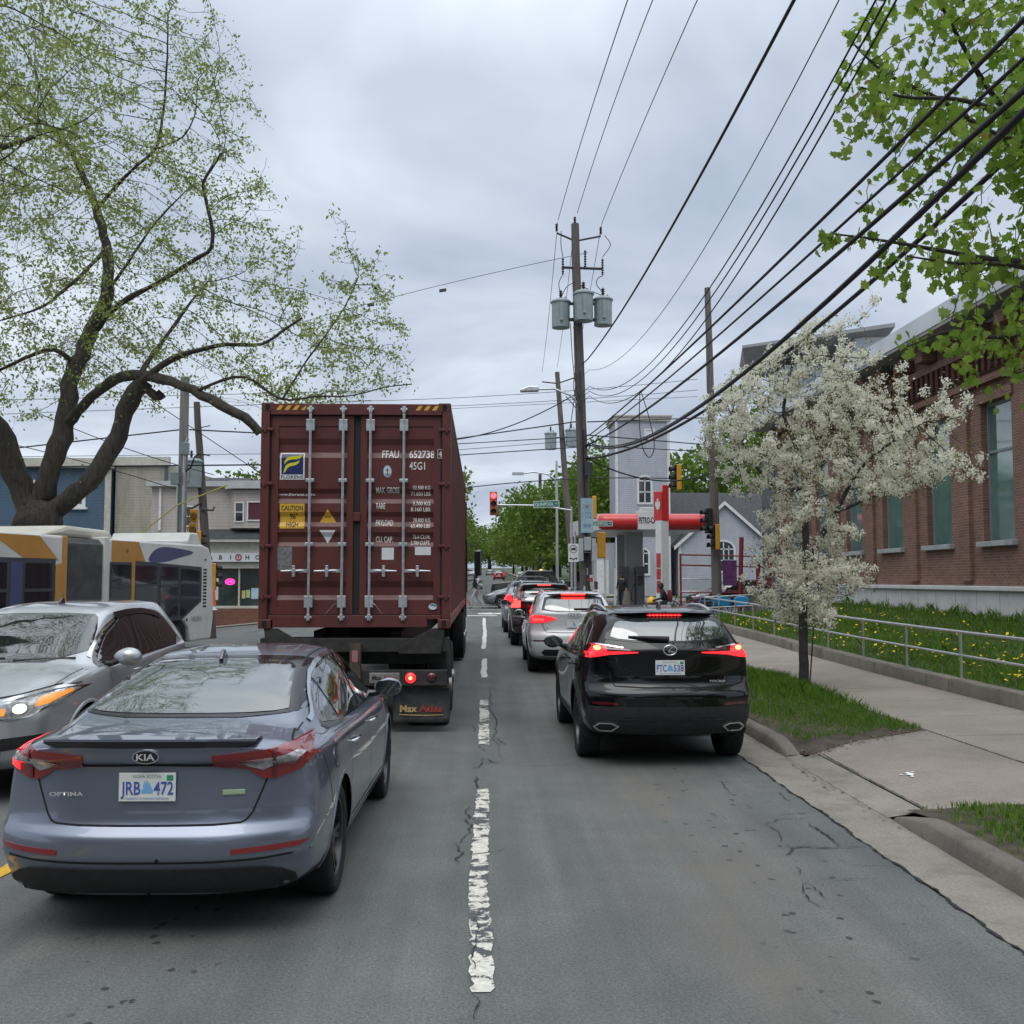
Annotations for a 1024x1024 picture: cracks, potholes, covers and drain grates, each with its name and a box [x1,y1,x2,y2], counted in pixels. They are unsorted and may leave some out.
crack [737,754,1024,953]
crack [454,808,503,862]
crack [468,913,480,1020]
